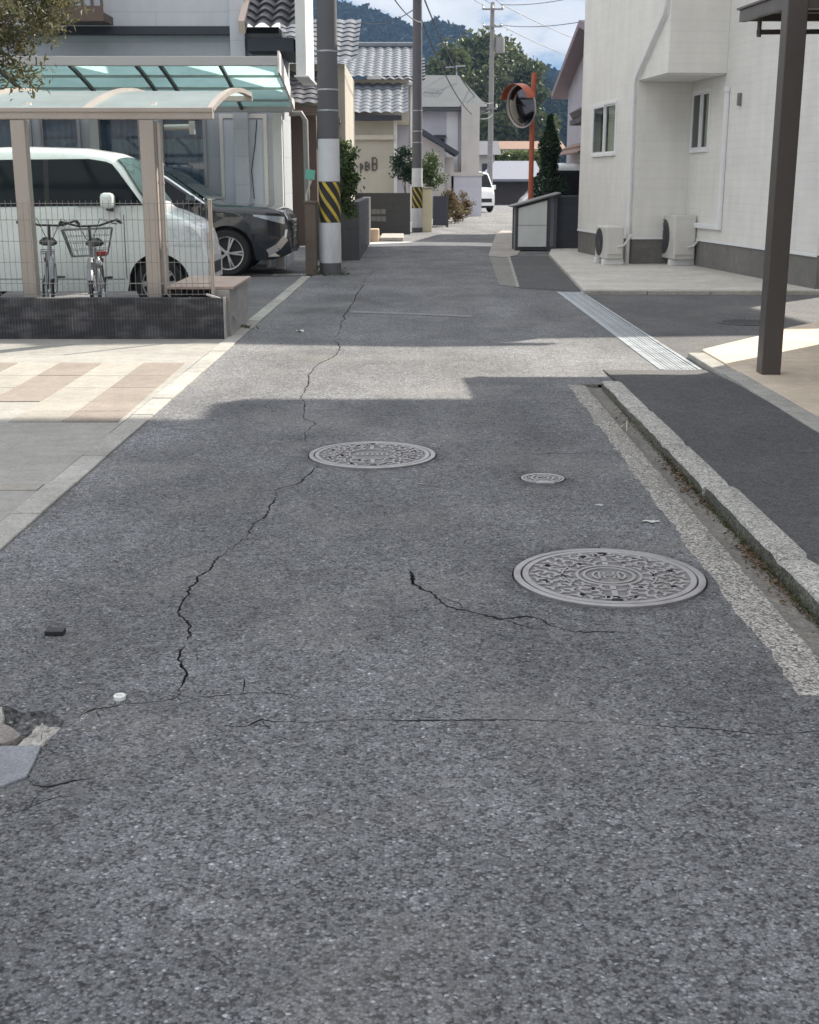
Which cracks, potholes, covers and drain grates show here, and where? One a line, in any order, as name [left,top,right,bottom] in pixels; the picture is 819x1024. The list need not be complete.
crack [206,719,819,735]
manhole cover [512,548,708,609]
drain grate [557,292,703,370]
pothole [0,705,65,781]
crack [79,466,318,721]
crack [293,282,364,441]
utility cover [520,473,565,484]
manhole cover [308,441,436,469]
crack [408,569,622,635]
